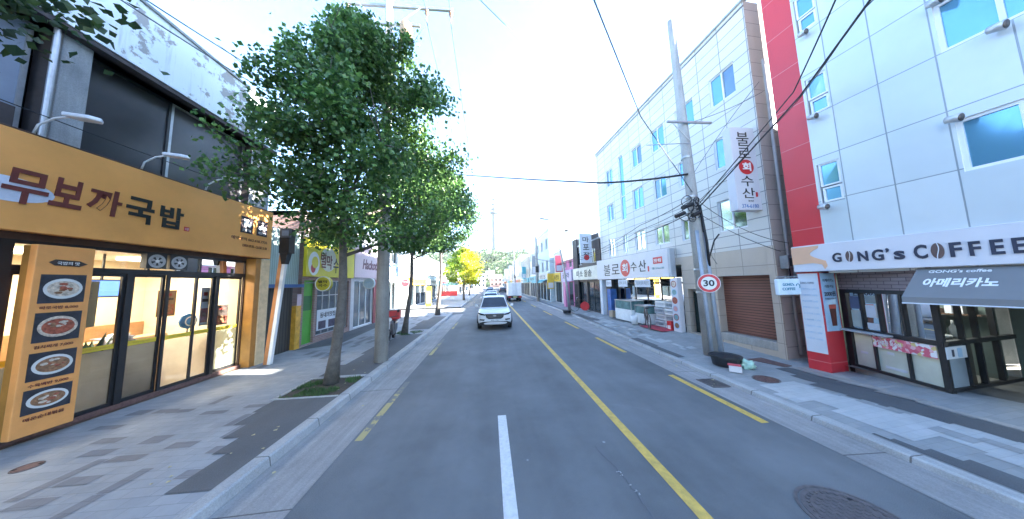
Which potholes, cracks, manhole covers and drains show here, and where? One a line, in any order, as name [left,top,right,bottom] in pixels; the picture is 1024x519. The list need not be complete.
manhole cover [794,485,901,519]
crack [595,446,655,519]
drain grate [696,378,731,388]
manhole cover [7,460,46,474]
manhole cover [751,375,781,383]
